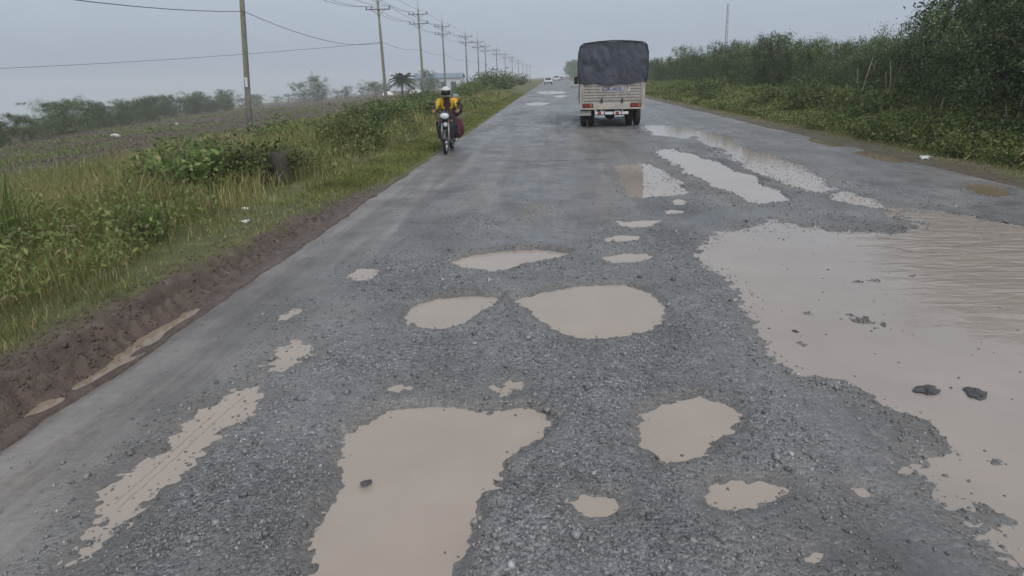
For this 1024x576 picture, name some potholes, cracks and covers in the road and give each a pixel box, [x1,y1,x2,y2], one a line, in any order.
pothole [594,249,664,264]
pothole [680,206,1024,576]
pothole [607,162,694,199]
pothole [284,393,568,576]
pothole [24,373,287,576]
pothole [391,287,511,332]
pothole [332,264,391,284]
pothole [441,243,581,272]
pothole [817,189,898,209]
pothole [544,480,642,529]
pothole [618,385,763,469]
pothole [507,278,680,342]
